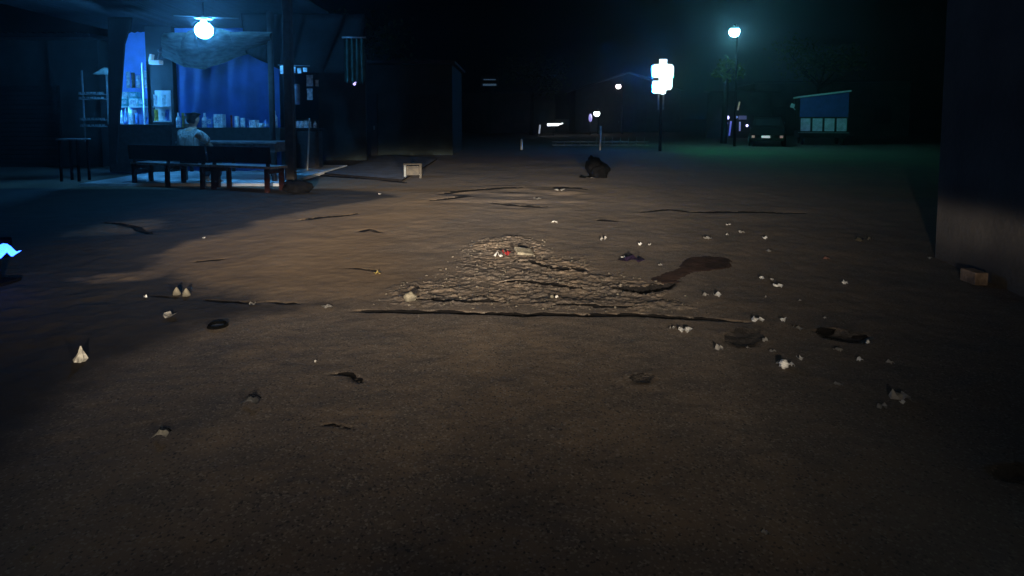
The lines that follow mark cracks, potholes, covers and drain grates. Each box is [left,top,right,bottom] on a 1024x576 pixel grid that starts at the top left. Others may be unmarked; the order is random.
crack [429,187,548,207]
pothole [817,330,870,344]
crack [105,222,153,235]
pothole [630,374,655,383]
pothole [724,327,765,347]
crack [361,260,742,323]
